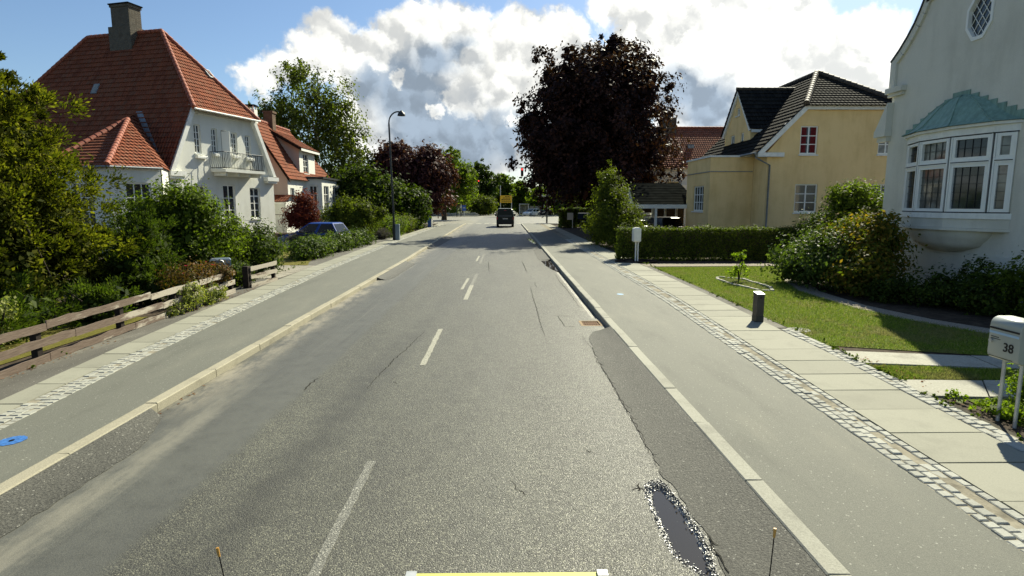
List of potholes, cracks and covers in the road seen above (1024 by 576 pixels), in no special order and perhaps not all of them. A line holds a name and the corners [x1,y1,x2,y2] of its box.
crack [522,262,662,491]
pothole [643,478,720,576]
